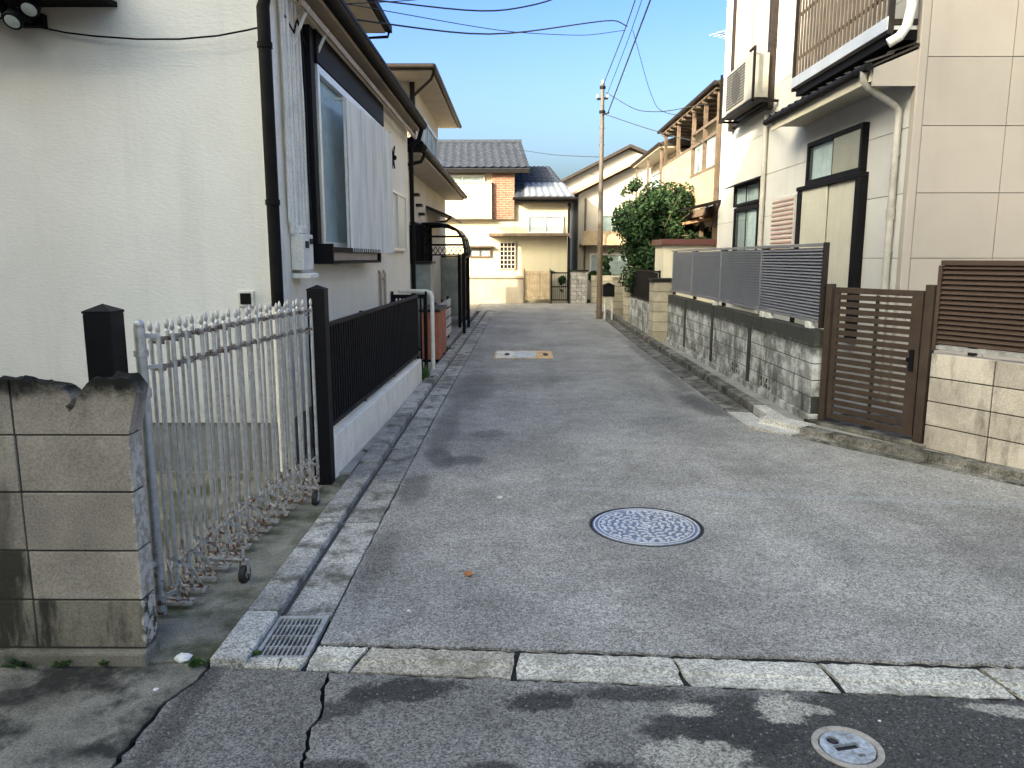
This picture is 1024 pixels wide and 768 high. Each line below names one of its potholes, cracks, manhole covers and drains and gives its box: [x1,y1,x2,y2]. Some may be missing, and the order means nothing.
drain grate [253,615,330,662]
crack [116,710,161,766]
manhole cover [589,507,704,547]
crack [300,675,329,768]
manhole cover [811,726,885,768]
